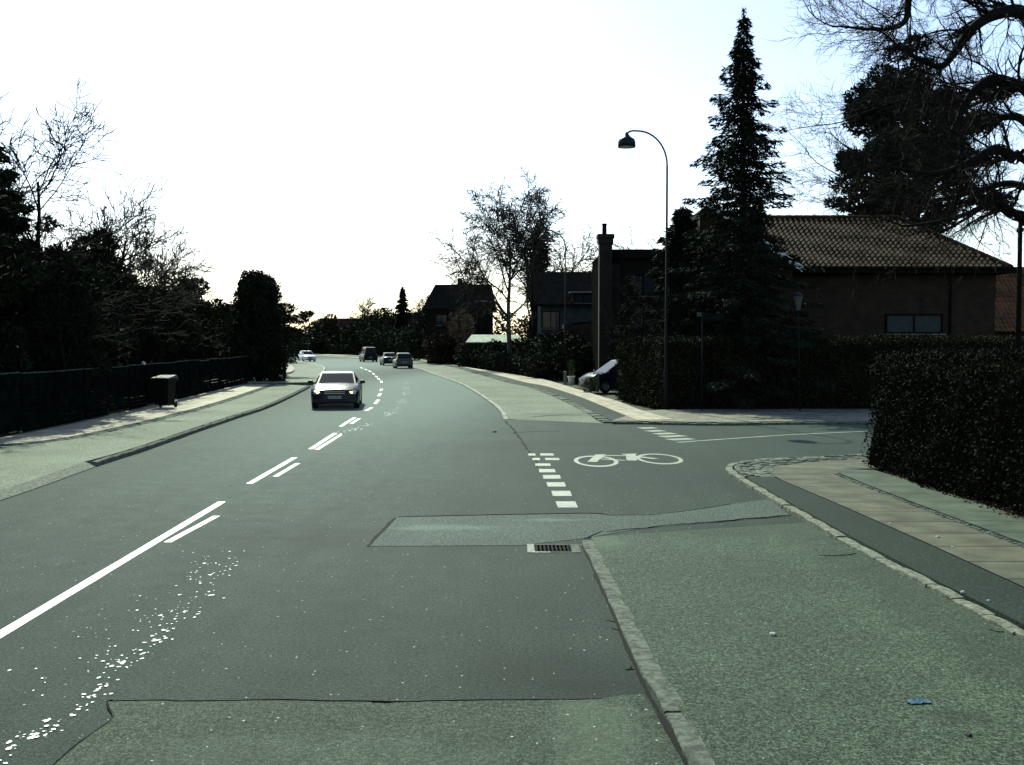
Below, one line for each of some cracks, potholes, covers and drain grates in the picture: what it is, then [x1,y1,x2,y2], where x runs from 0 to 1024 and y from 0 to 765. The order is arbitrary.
drain grate [527,544,581,553]
